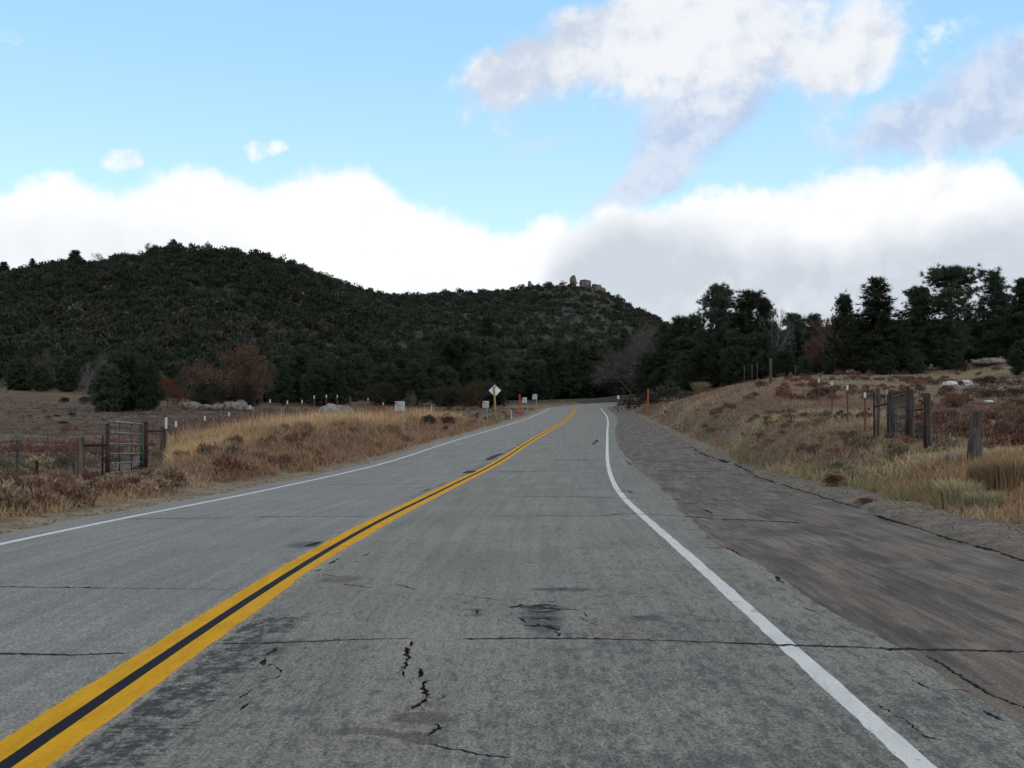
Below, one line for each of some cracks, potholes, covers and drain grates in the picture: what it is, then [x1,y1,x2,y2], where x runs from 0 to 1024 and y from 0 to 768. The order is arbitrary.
crack [314,551,1024,653]
crack [912,680,1004,721]
crack [878,705,936,739]
crack [222,638,512,758]
